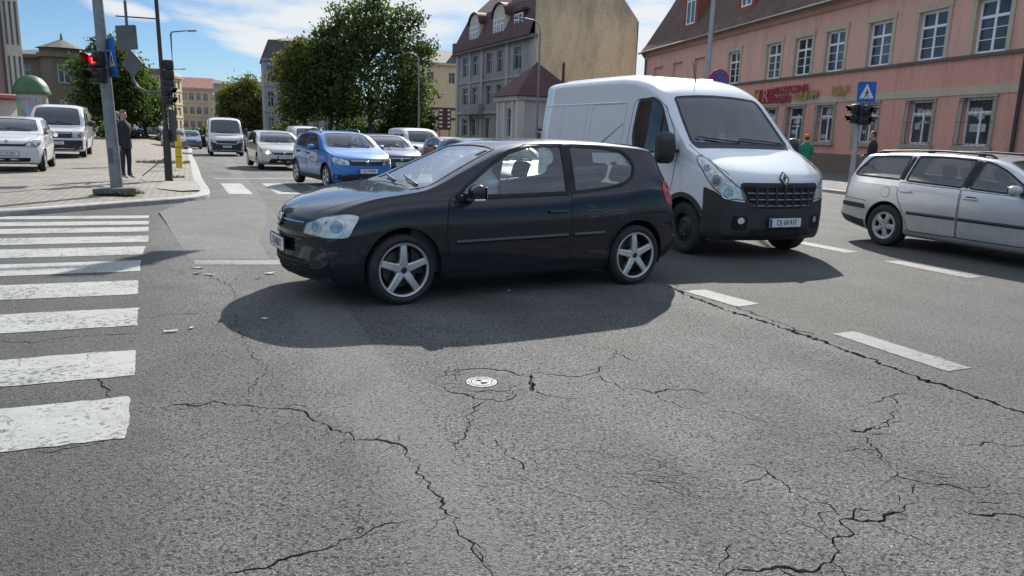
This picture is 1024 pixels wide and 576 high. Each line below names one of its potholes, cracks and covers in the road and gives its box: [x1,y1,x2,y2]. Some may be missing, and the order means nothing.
manhole cover [466,377,497,388]
